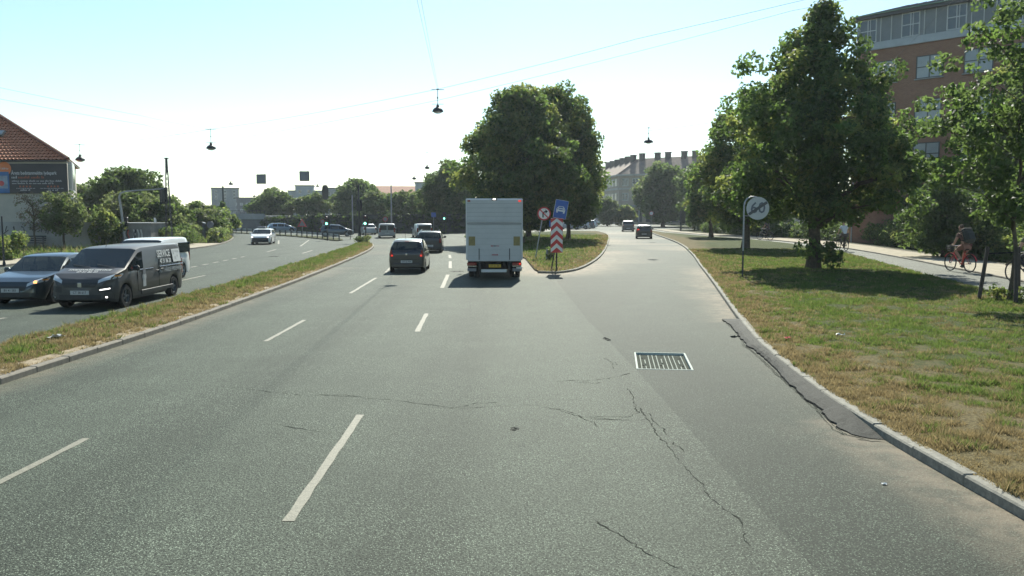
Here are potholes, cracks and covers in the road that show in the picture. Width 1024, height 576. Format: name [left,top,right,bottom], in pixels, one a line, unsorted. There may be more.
crack [221,359,751,547]
crack [597,521,696,576]
